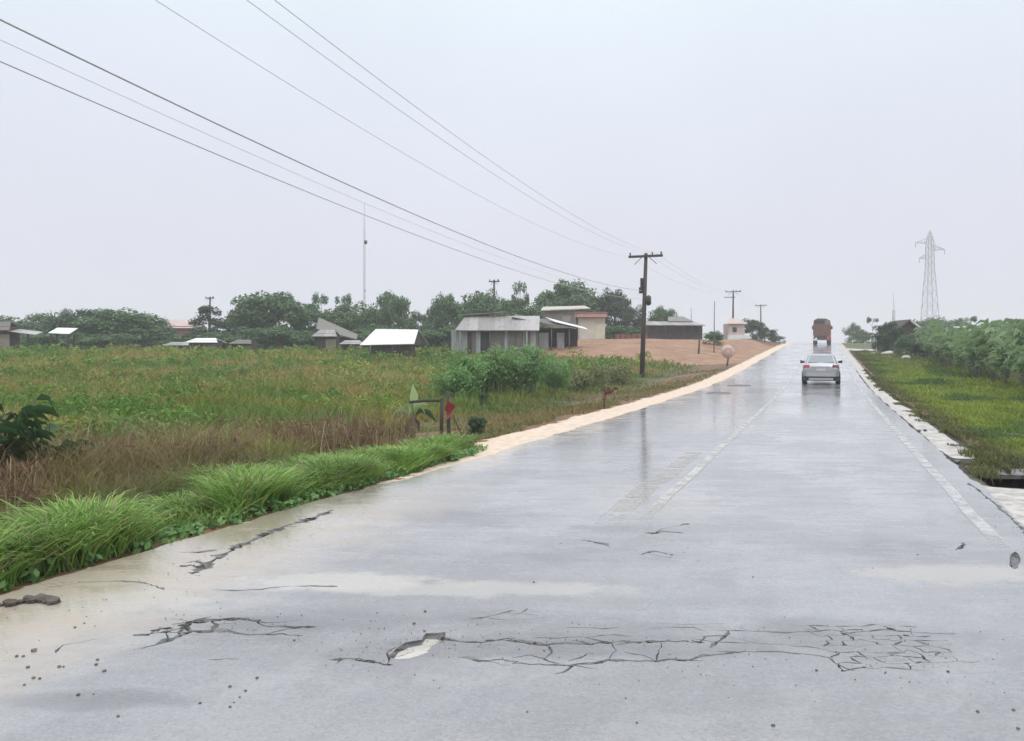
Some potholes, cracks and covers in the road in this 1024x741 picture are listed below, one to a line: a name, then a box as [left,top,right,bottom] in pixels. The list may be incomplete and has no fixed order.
crack [645,524,689,534]
crack [46,510,338,591]
crack [329,648,394,666]
crack [436,609,979,674]
crack [133,616,315,660]
pothole [387,632,445,659]
